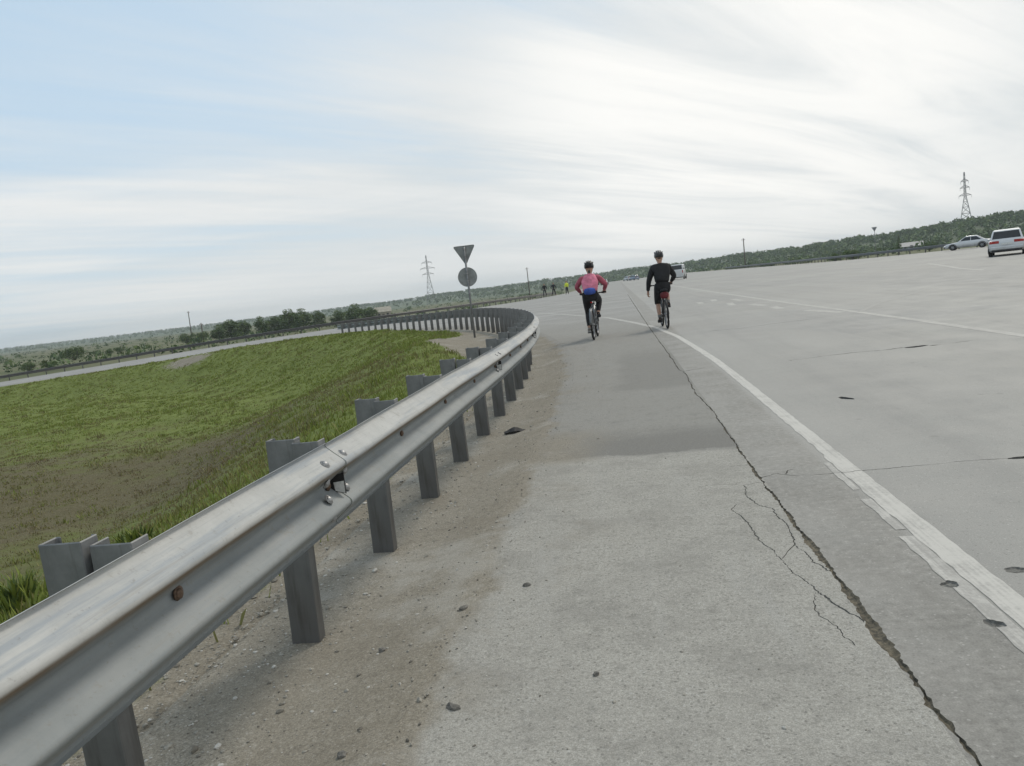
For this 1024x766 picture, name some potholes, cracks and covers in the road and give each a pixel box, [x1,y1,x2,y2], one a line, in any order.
crack [627,294,1024,766]
